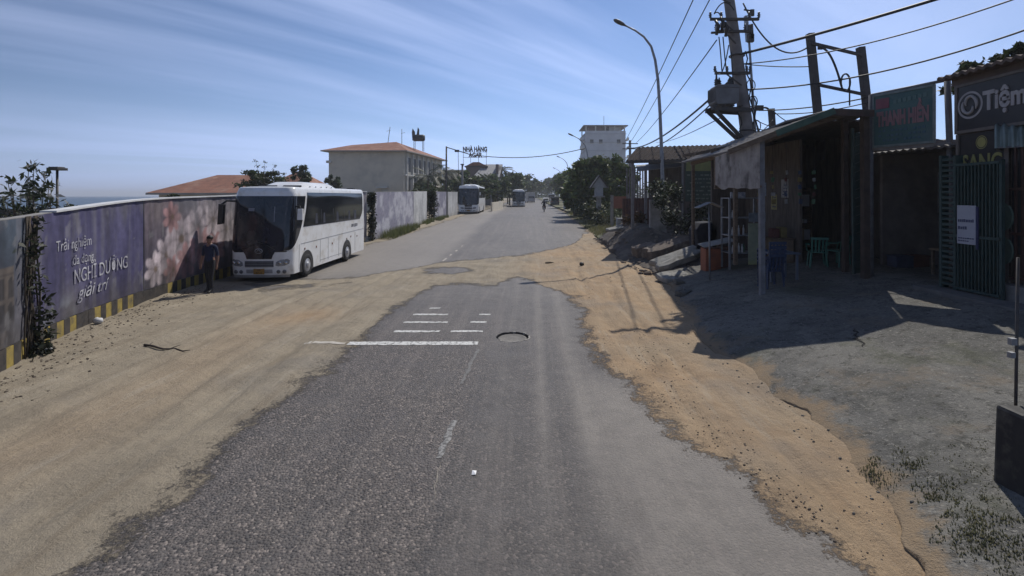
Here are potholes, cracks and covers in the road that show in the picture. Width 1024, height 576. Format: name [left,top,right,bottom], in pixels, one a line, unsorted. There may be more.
manhole cover [496,331,531,342]
